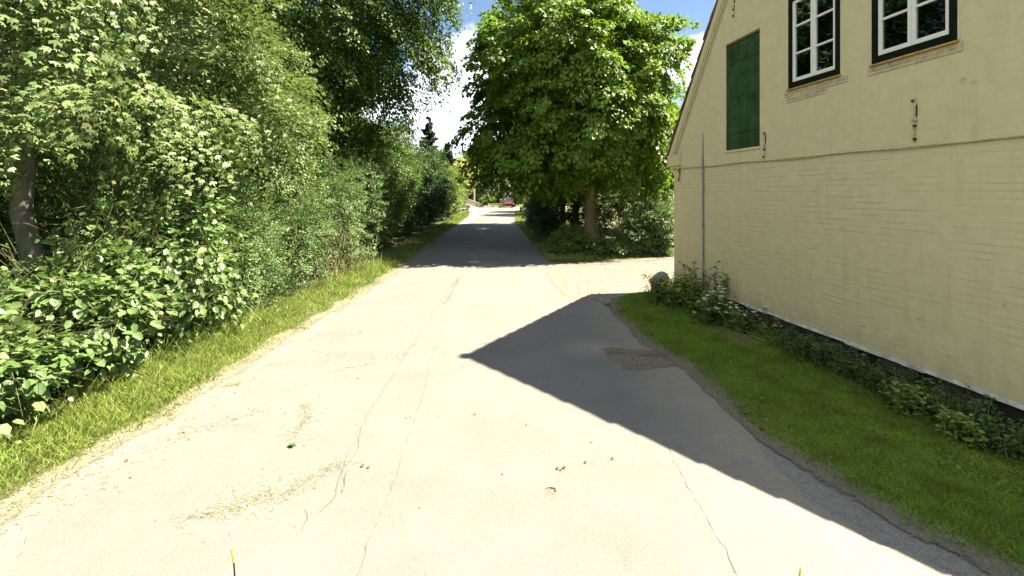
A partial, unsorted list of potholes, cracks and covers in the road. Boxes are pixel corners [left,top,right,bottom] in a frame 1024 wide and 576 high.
crack [667,446,737,574]
crack [301,273,464,575]
